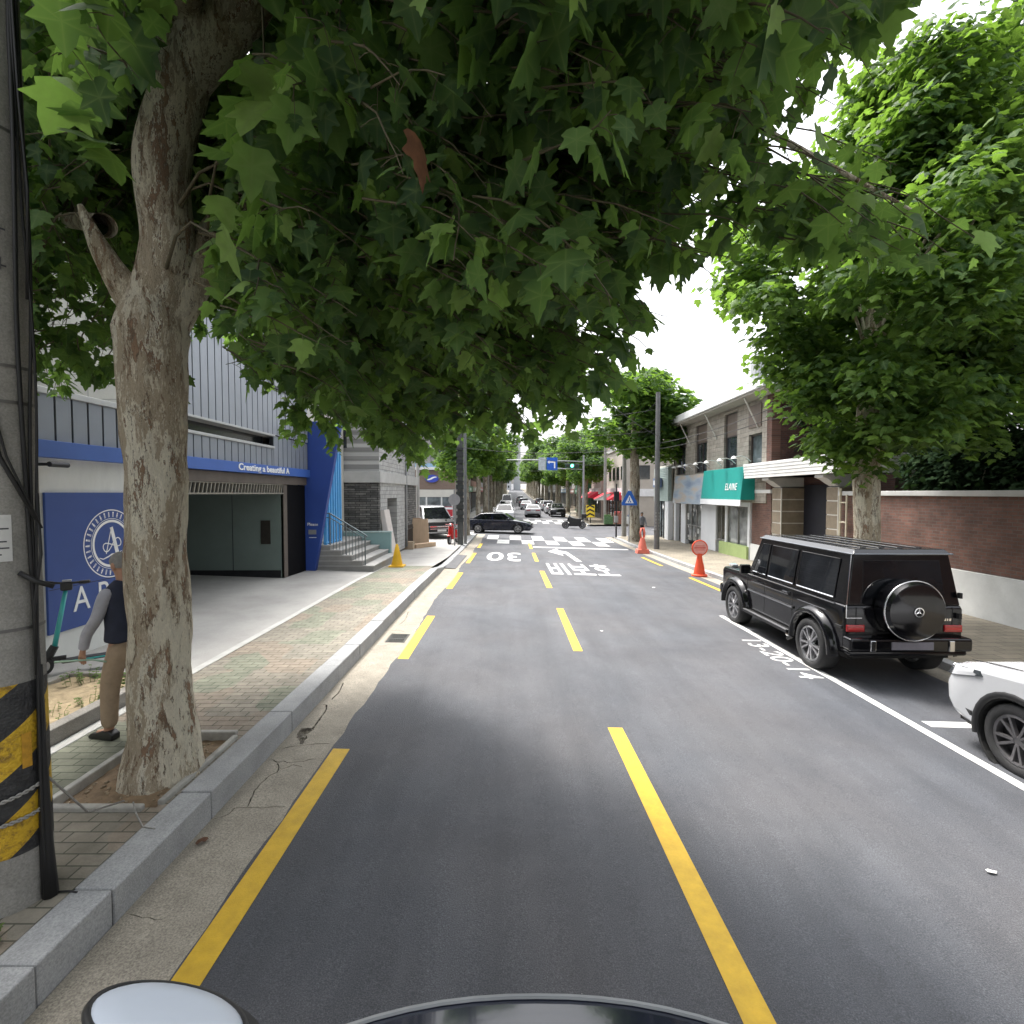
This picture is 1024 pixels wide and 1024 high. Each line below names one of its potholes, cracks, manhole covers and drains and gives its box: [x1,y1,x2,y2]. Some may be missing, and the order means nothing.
drain grate [386,634,410,643]
pothole [297,727,315,745]
